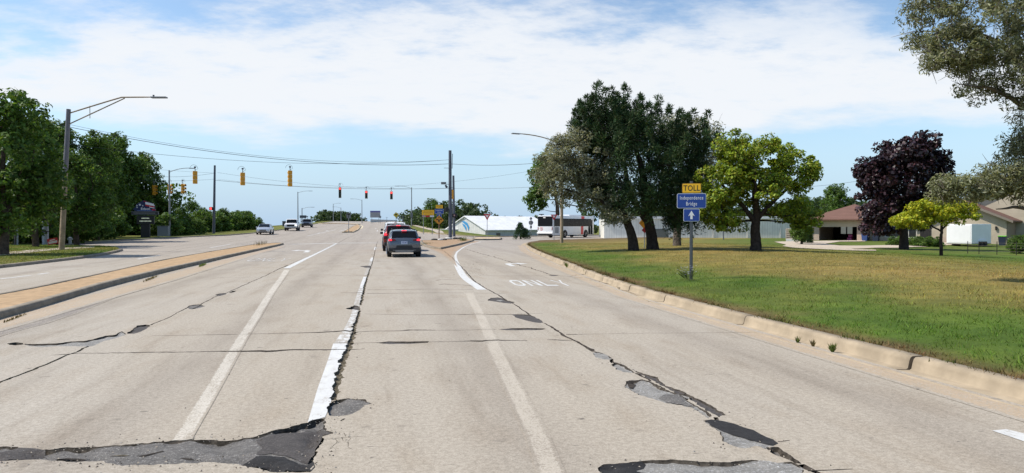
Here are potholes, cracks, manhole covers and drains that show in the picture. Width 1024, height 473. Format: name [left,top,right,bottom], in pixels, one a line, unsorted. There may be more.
pothole [625,379,712,418]
pothole [705,419,777,449]
crack [0,235,848,473]
pothole [598,459,804,473]
pothole [0,418,333,472]
pothole [512,314,544,323]
pothole [127,325,150,334]
pothole [327,398,372,419]
